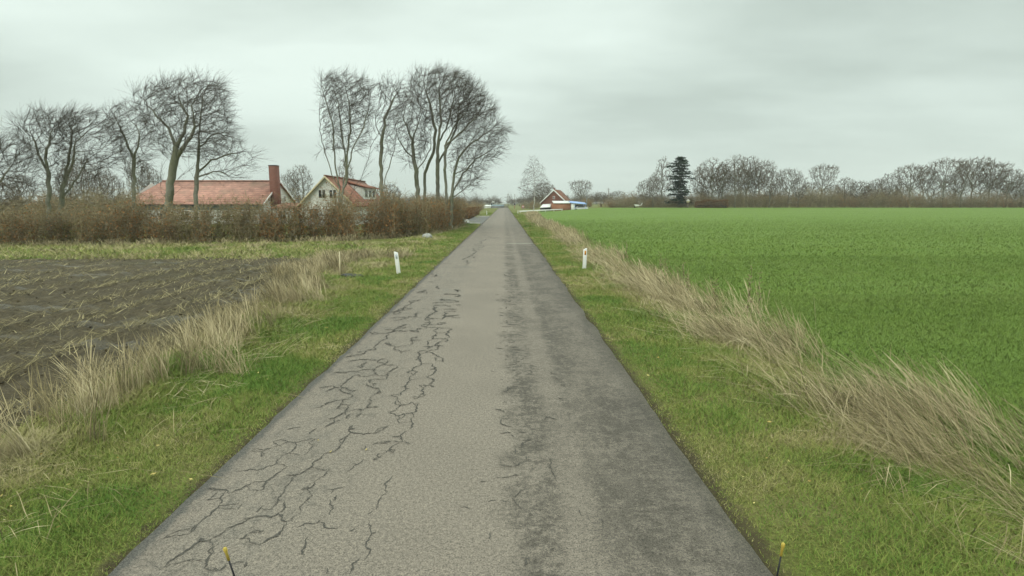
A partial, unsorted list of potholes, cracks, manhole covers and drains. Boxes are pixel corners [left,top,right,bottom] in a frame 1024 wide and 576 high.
crack [163,272,439,574]
crack [373,289,461,460]
